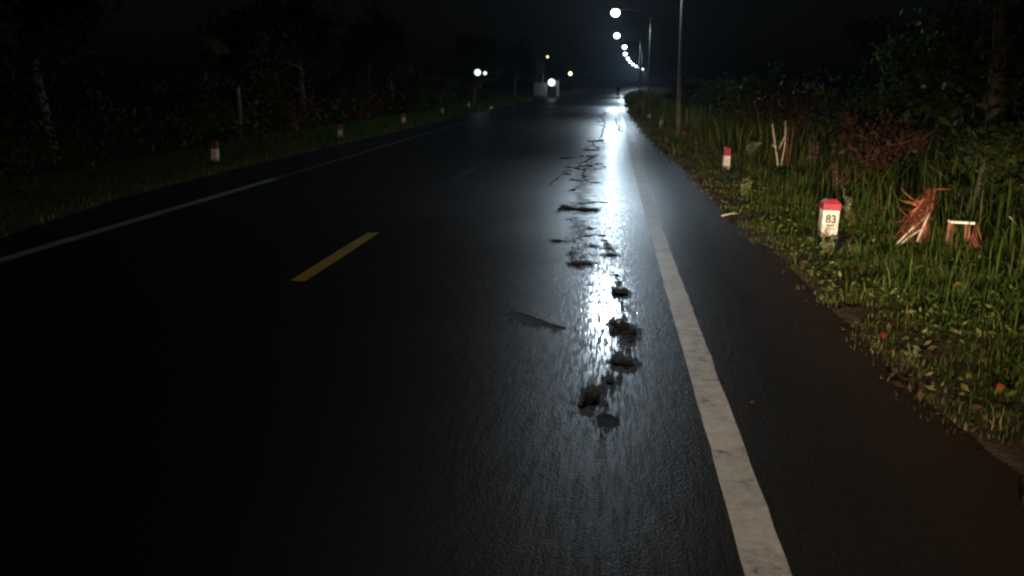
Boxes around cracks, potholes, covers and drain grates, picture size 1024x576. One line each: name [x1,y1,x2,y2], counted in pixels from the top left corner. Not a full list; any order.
pothole [596,414,620,428]
pothole [611,289,629,298]
pothole [504,313,566,330]
crack [549,110,608,242]
pothole [578,390,602,409]
pothole [609,321,637,344]
pothole [610,359,634,370]
